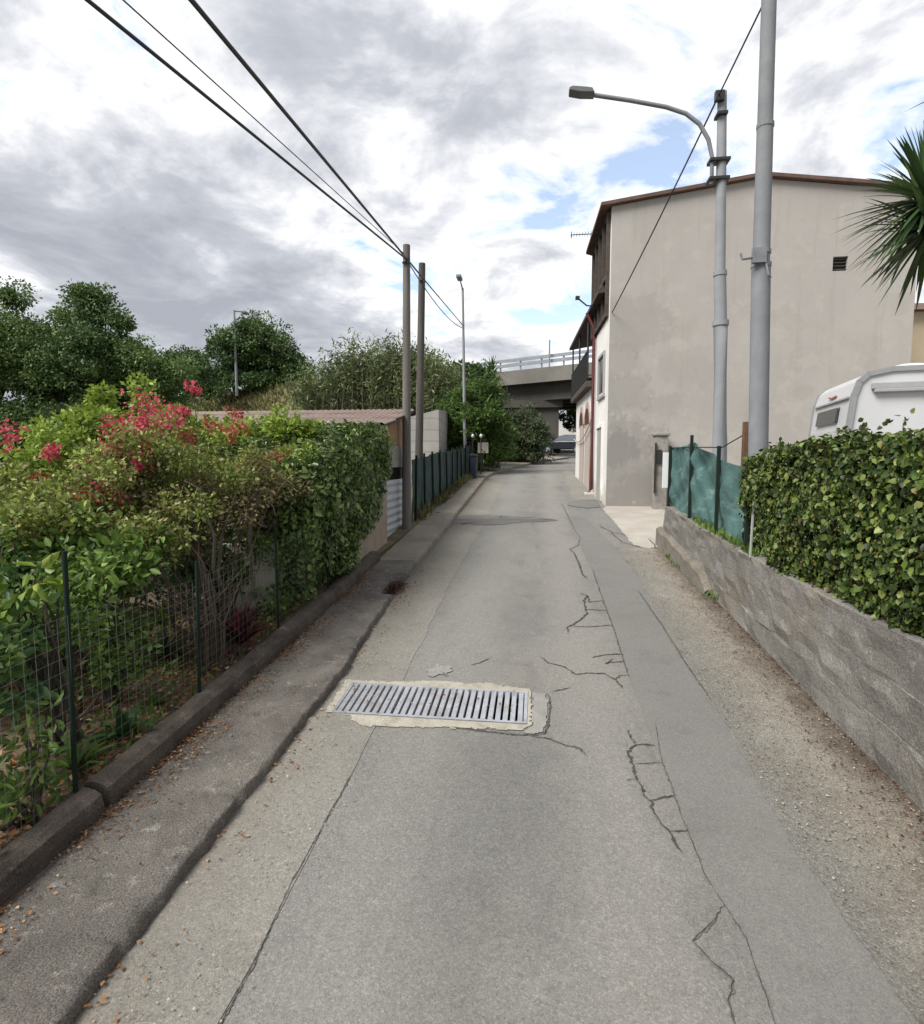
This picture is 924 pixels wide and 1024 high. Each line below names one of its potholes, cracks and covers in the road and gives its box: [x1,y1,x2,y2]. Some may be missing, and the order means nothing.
crack [561,503,608,632]
drain grate [326,679,549,734]
crack [456,653,629,756]
crack [626,729,688,852]
crack [692,905,735,1024]
